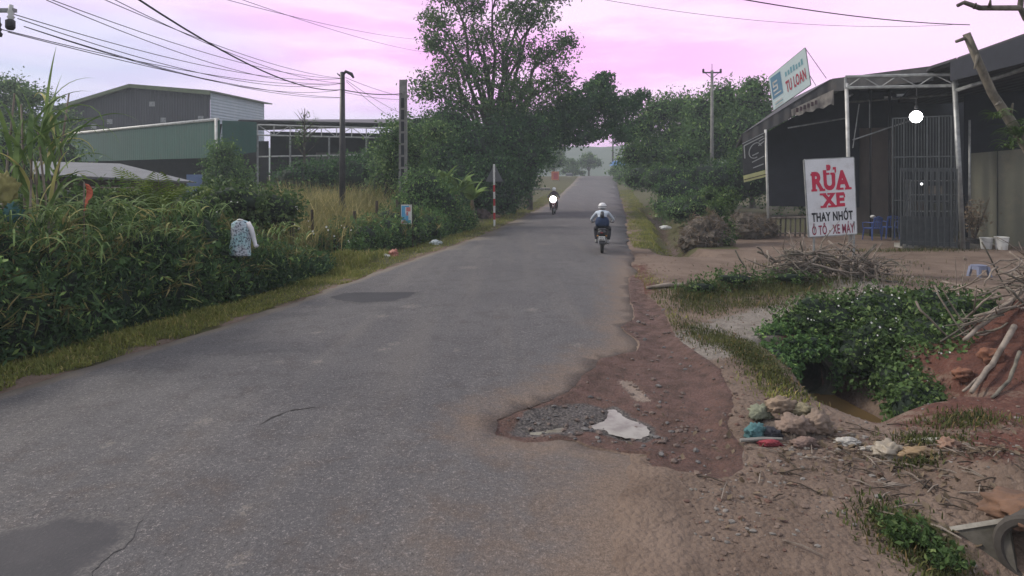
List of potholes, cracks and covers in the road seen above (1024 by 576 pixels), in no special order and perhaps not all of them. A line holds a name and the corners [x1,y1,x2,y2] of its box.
pothole [495,276,744,479]
